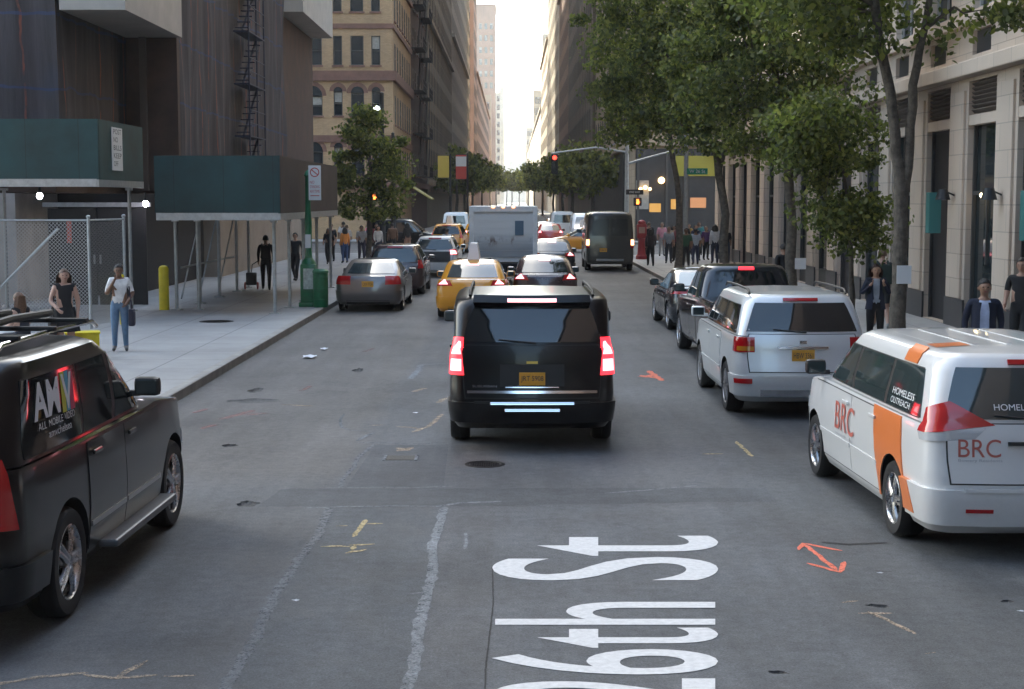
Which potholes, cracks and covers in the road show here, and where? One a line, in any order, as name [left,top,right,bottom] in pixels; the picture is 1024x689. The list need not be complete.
manhole cover [465,460,505,468]
